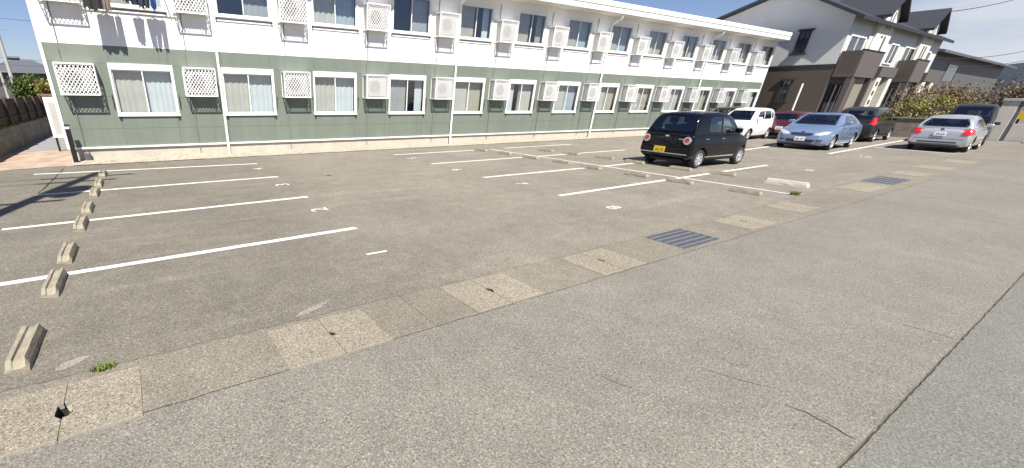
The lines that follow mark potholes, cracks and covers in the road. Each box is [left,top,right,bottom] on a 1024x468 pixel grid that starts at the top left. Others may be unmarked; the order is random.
drain grate [862,176,910,185]
drain grate [645,229,719,256]
crack [787,405,854,439]
pothole [55,403,73,419]
